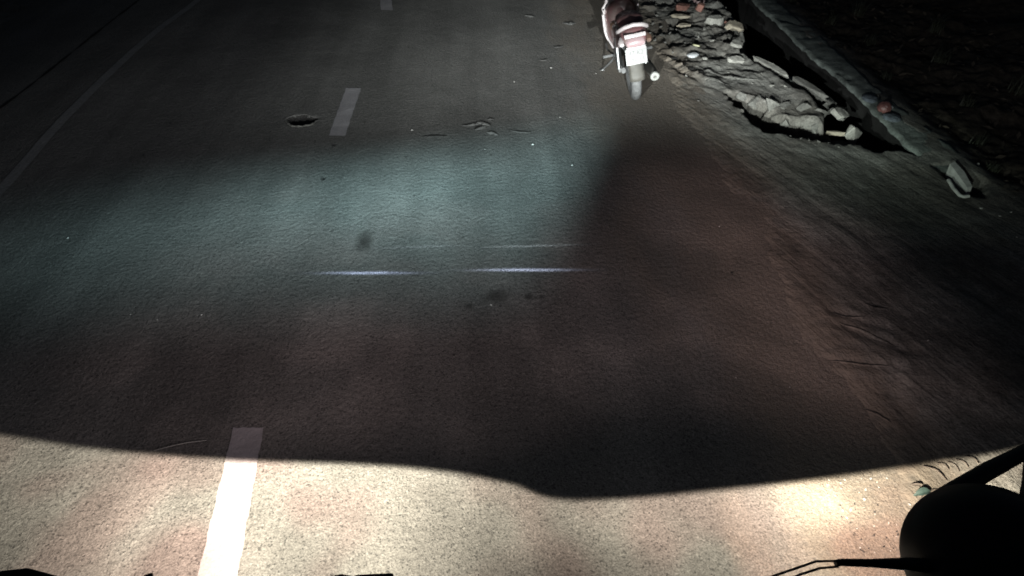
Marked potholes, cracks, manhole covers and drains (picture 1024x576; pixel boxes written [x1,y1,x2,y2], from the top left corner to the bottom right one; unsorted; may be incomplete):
crack [866,409,891,423]
crack [828,303,898,367]
pothole [284,113,321,127]
crack [422,117,530,137]
